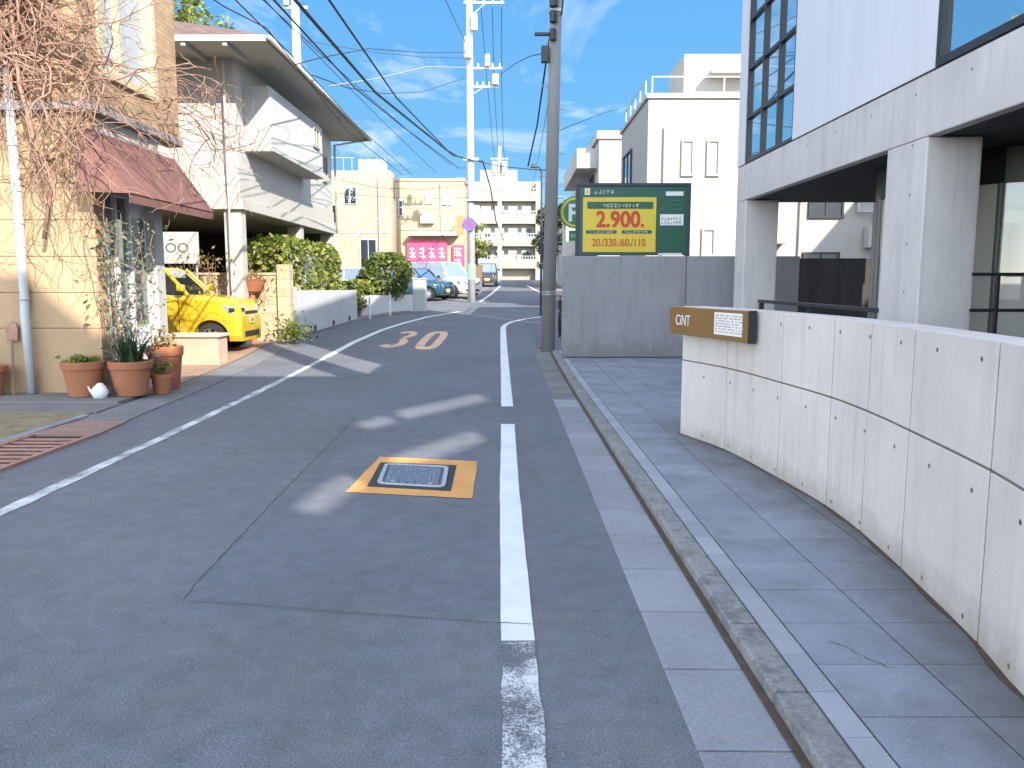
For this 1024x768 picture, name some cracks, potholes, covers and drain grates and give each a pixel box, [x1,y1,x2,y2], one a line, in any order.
manhole cover [346,457,477,498]
drain grate [0,434,95,472]
